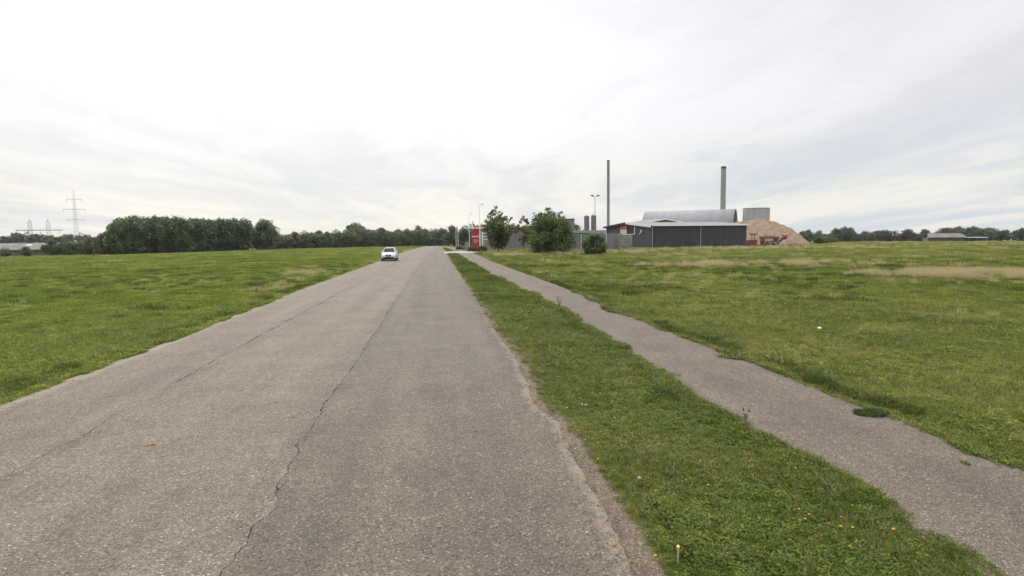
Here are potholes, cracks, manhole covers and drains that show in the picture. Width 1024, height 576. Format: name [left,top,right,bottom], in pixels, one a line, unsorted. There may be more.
crack [1,297,331,478]
crack [219,300,396,576]
